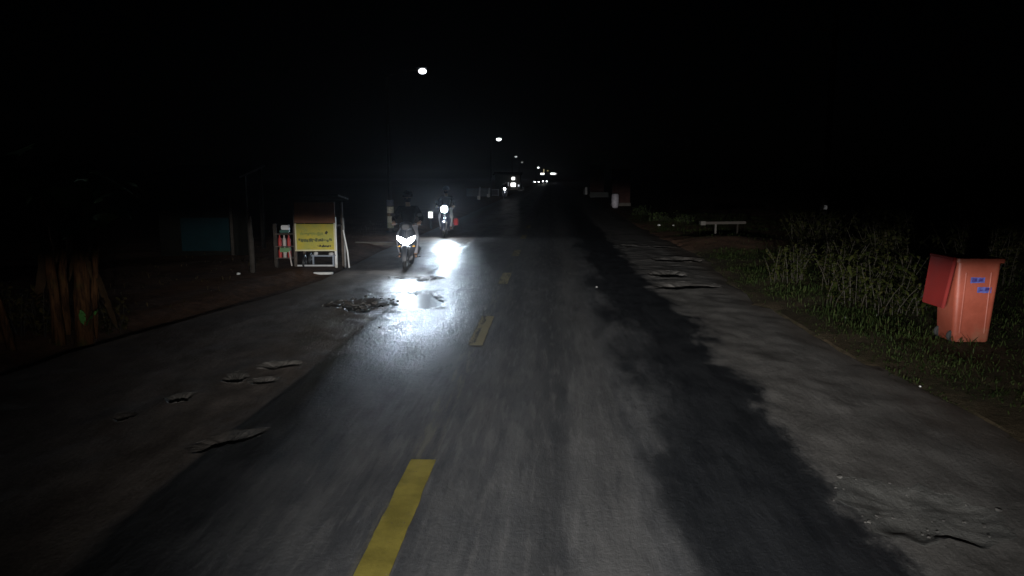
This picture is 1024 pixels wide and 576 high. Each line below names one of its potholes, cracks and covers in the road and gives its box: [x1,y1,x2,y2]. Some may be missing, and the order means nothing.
pothole [384,289,448,309]
pothole [219,370,250,383]
pothole [255,360,306,370]
pothole [163,392,197,404]
pothole [110,412,139,422]
pothole [247,376,279,385]
pothole [184,427,271,454]
pothole [321,295,399,313]
pothole [650,281,723,290]
pothole [646,269,690,278]
